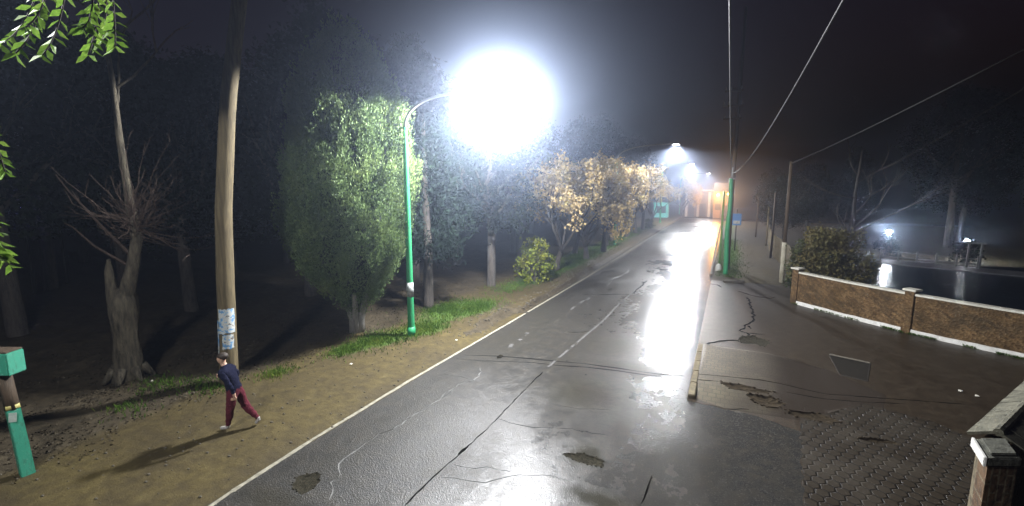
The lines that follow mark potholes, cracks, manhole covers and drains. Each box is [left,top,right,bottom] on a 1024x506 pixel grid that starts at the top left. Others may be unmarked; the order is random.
pothole [291,472,322,495]
pothole [746,393,787,408]
crack [329,291,959,500]
manhole cover [829,354,871,382]
pothole [720,380,775,394]
pothole [563,452,605,468]
